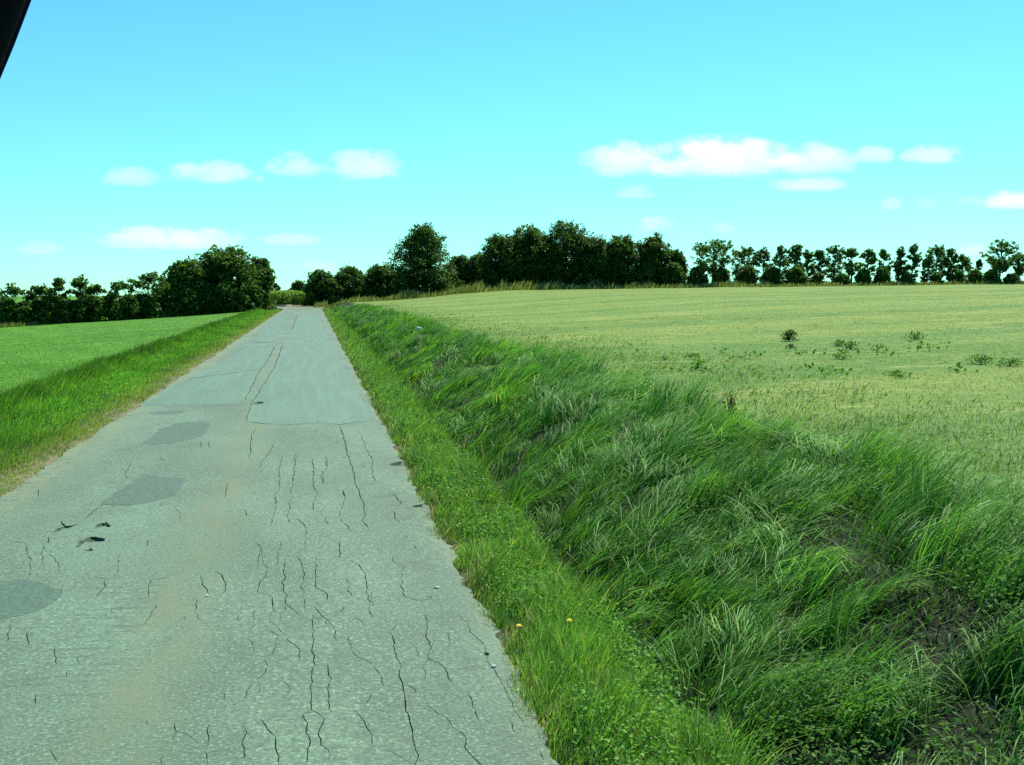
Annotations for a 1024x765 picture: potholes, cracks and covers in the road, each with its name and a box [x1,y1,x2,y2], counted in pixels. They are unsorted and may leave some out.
pothole [76,537,105,547]
crack [183,342,525,765]
